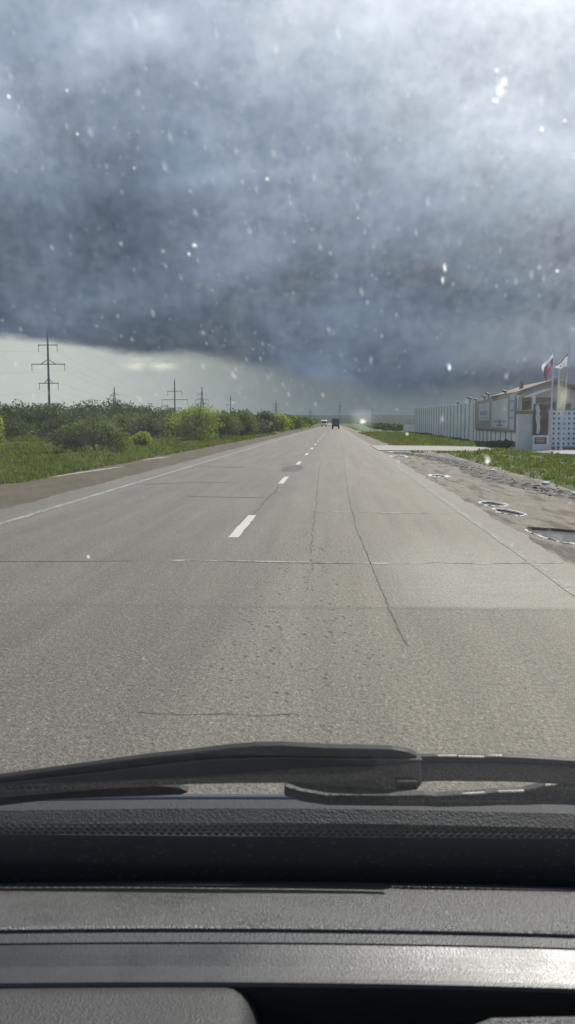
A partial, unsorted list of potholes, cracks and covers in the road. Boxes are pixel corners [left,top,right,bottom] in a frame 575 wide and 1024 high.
crack [0,445,561,646]
pothole [492,508,527,516]
pothole [524,527,575,545]
